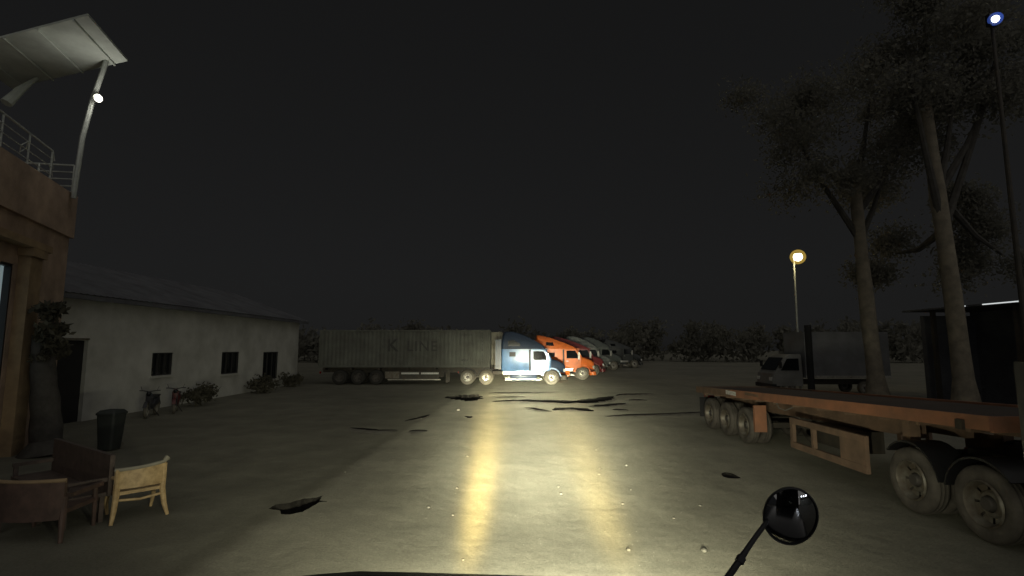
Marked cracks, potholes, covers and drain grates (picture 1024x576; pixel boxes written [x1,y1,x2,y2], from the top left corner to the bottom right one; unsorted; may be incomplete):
crack [588,394,700,417]
crack [349,414,430,434]
crack [492,392,557,412]
pothole [269,495,327,515]
